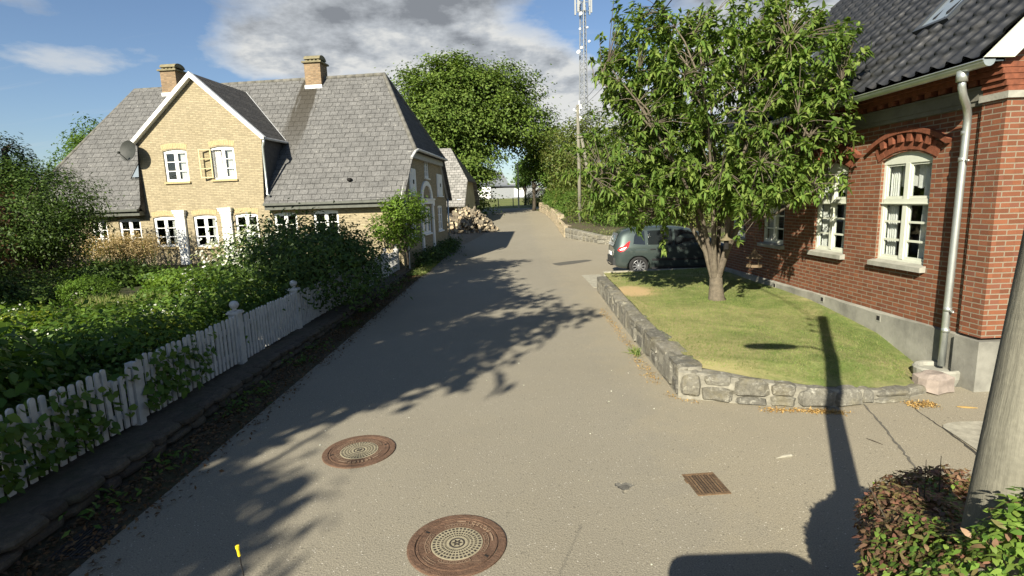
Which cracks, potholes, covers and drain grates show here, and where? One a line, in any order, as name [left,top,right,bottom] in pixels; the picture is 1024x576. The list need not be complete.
manhole cover [322,435,396,469]
drain grate [682,472,731,496]
manhole cover [407,514,507,576]
crack [864,404,976,469]
